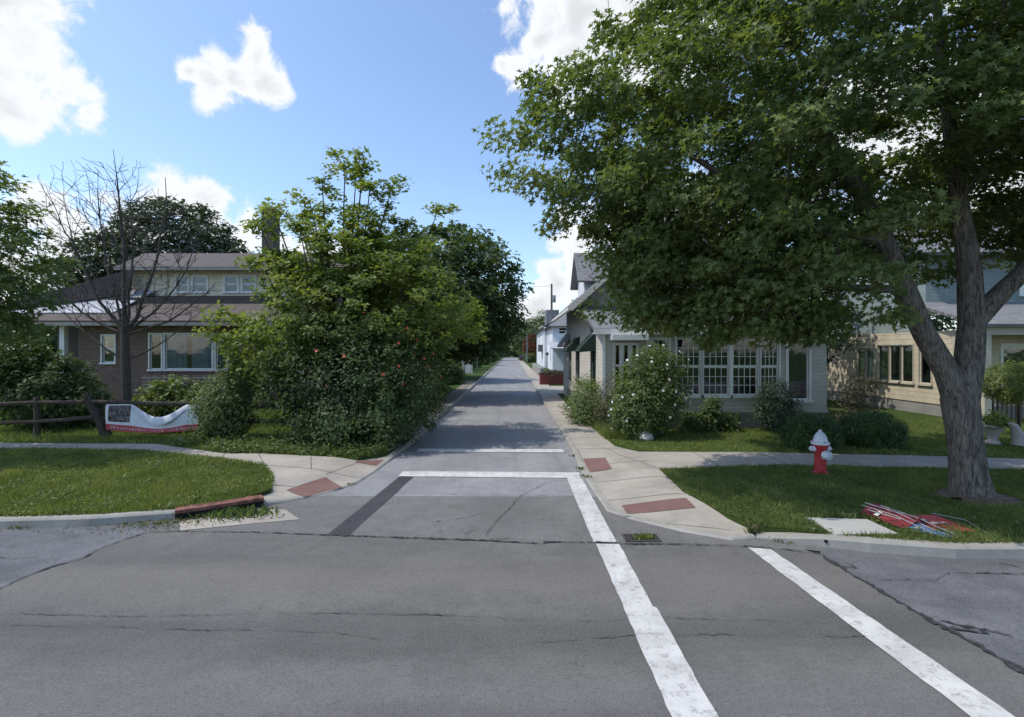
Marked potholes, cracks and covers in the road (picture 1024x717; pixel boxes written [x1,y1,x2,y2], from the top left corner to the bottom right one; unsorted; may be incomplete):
drain grate [622,534,662,542]
crack [421,486,540,534]
crack [7,612,867,642]
